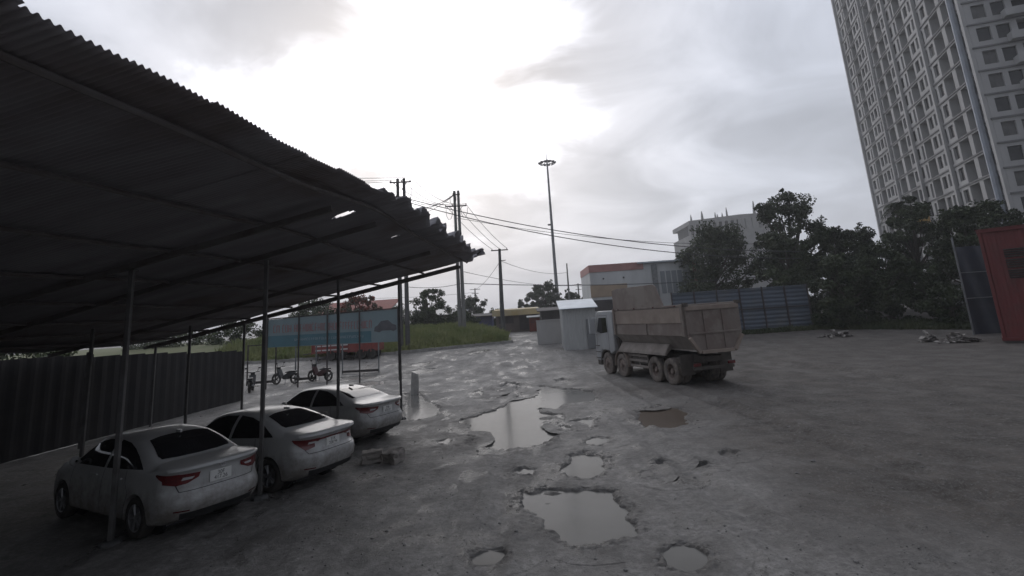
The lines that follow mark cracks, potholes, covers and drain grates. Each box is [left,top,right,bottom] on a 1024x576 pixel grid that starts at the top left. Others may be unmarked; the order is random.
pothole [442,383,613,456]
pothole [490,480,677,566]
pothole [536,445,633,487]
pothole [612,403,714,432]
pothole [623,528,755,576]
pothole [562,431,631,450]
